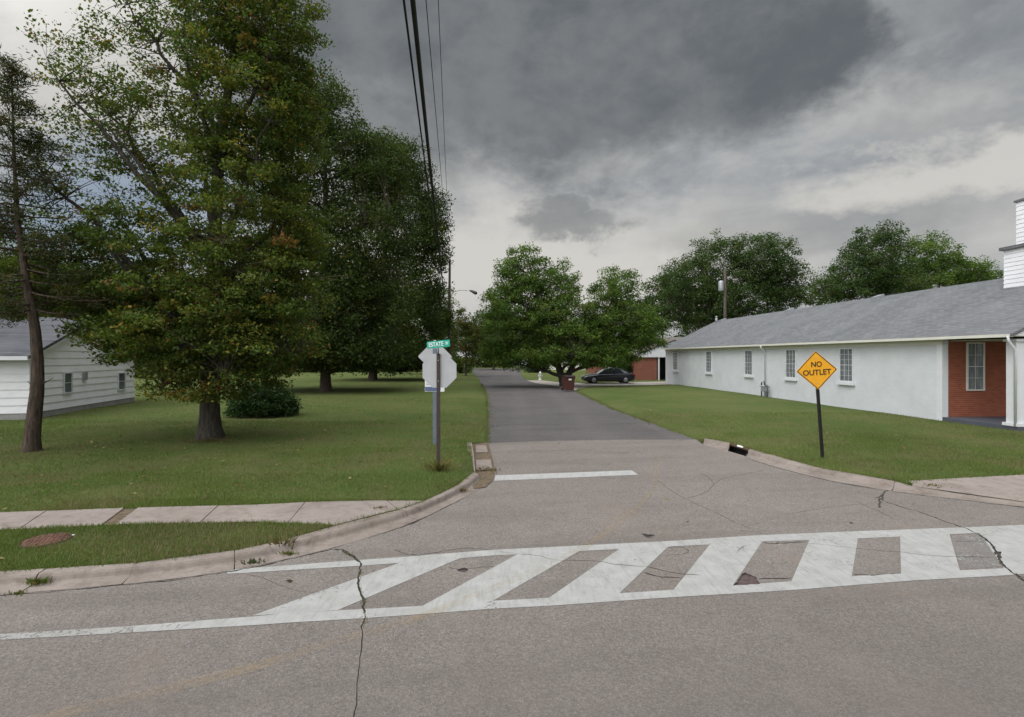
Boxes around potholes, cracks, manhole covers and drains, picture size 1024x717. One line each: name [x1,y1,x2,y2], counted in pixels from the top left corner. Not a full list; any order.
crack [544,547,693,579]
pothole [734,572,760,585]
crack [335,549,366,717]
drain grate [467,442,495,488]
crack [768,490,1024,581]
drain grate [728,443,749,458]
crack [656,471,765,534]
manhole cover [18,532,75,549]
